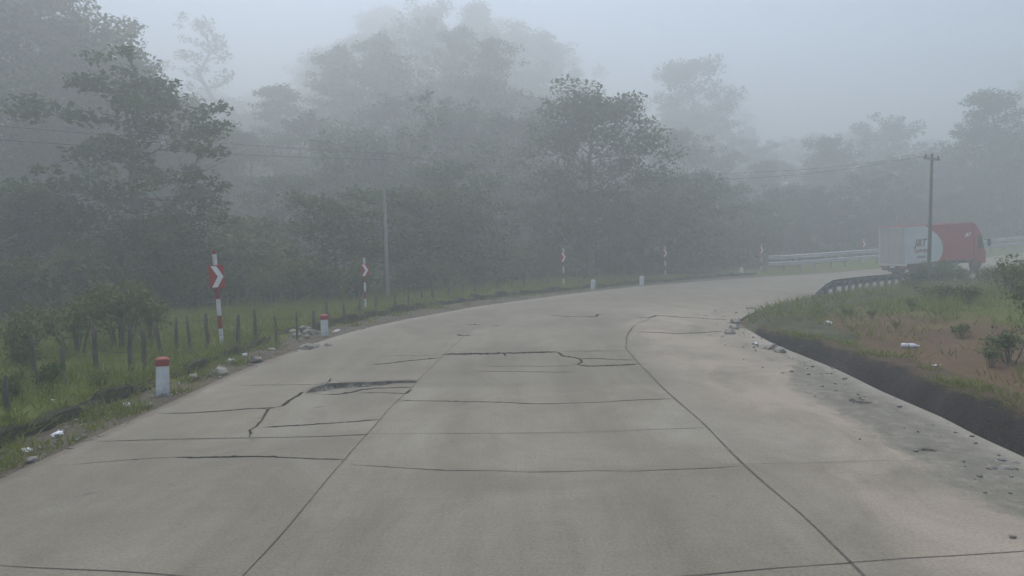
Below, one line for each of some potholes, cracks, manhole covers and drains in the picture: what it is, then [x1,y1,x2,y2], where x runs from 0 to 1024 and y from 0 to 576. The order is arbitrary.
crack [374,324,635,372]
pothole [307,380,417,393]
crack [165,379,655,437]
